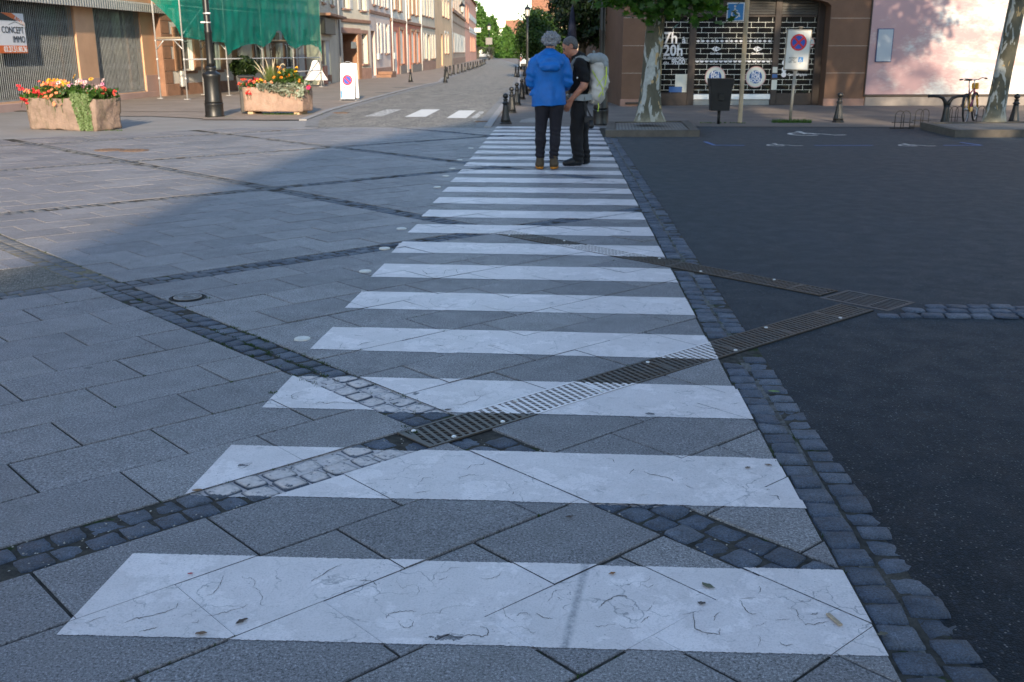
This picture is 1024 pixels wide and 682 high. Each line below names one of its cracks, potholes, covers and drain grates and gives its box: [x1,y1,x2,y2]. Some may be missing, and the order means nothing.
manhole cover [169,293,207,302]
drain grate [397,303,874,448]
